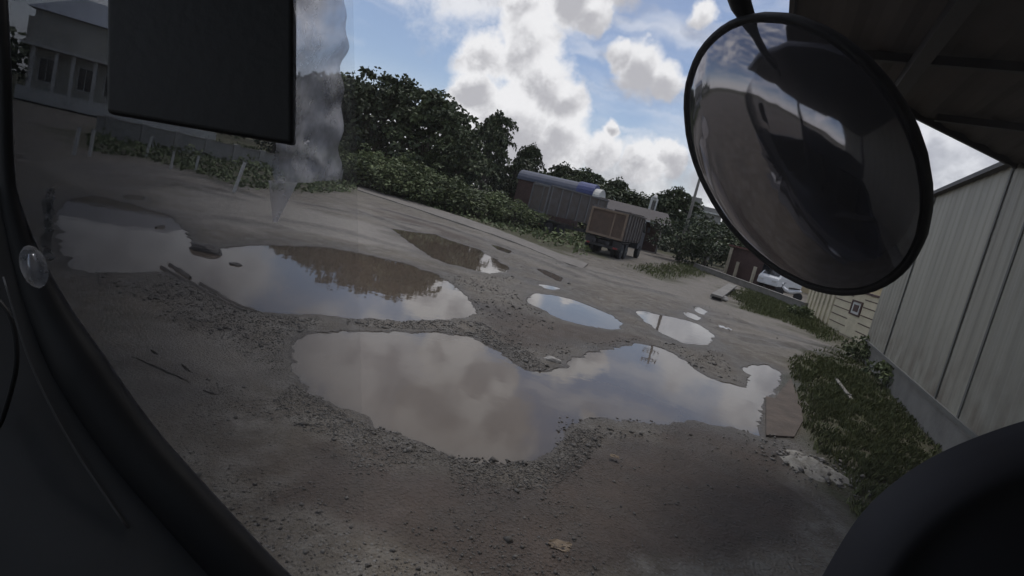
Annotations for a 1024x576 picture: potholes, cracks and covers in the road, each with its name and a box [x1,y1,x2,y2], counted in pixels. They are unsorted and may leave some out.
pothole [286,330,784,465]
pothole [537,268,564,282]
pothole [142,207,478,322]
pothole [635,310,715,345]
pothole [390,228,510,274]
pothole [526,293,625,330]
